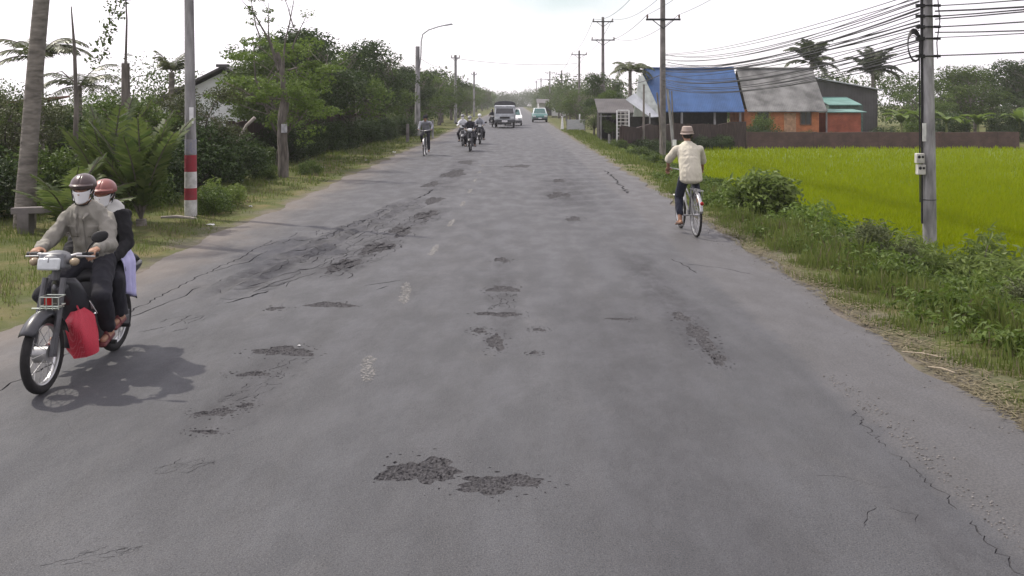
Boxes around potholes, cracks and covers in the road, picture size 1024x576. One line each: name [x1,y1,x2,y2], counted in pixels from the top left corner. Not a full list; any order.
pothole [236,345,321,361]
pothole [705,348,731,370]
pothole [685,323,723,359]
pothole [369,448,471,496]
crack [818,475,918,526]
crack [0,190,447,391]
pothole [483,330,511,353]
pothole [426,467,556,501]
crack [853,411,1023,575]
pothole [667,311,691,322]
pothole [481,284,520,292]
pothole [184,406,246,420]
